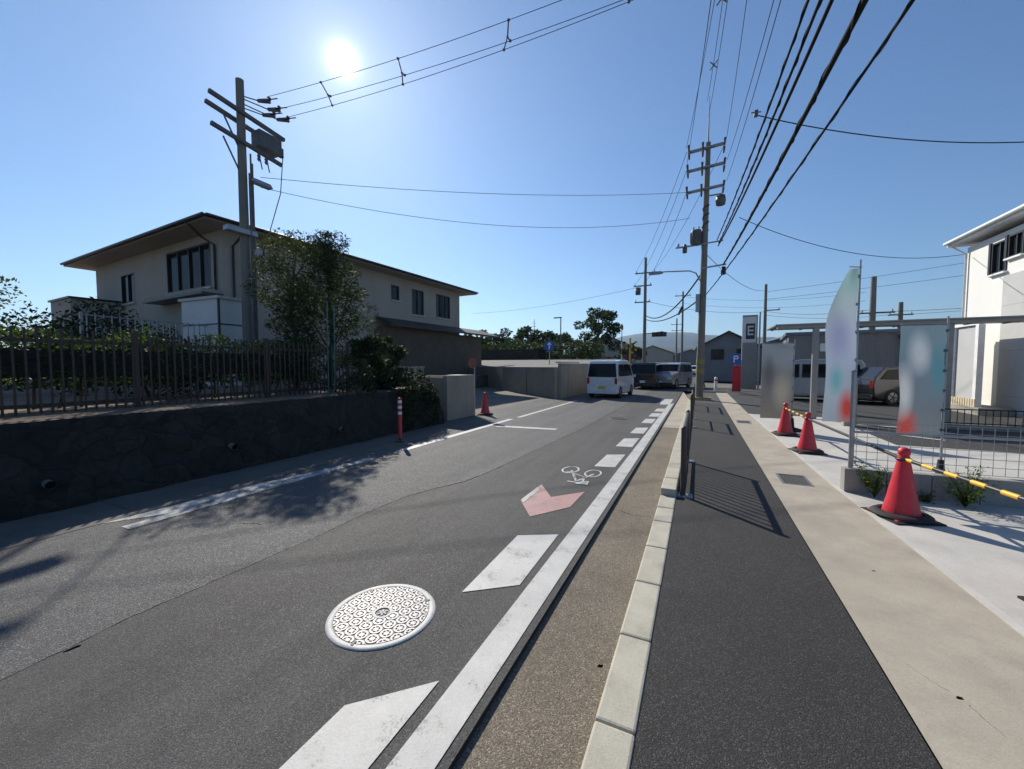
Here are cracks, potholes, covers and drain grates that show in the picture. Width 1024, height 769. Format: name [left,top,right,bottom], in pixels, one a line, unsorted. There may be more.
manhole cover [325,584,436,651]
drain grate [776,473,814,487]
